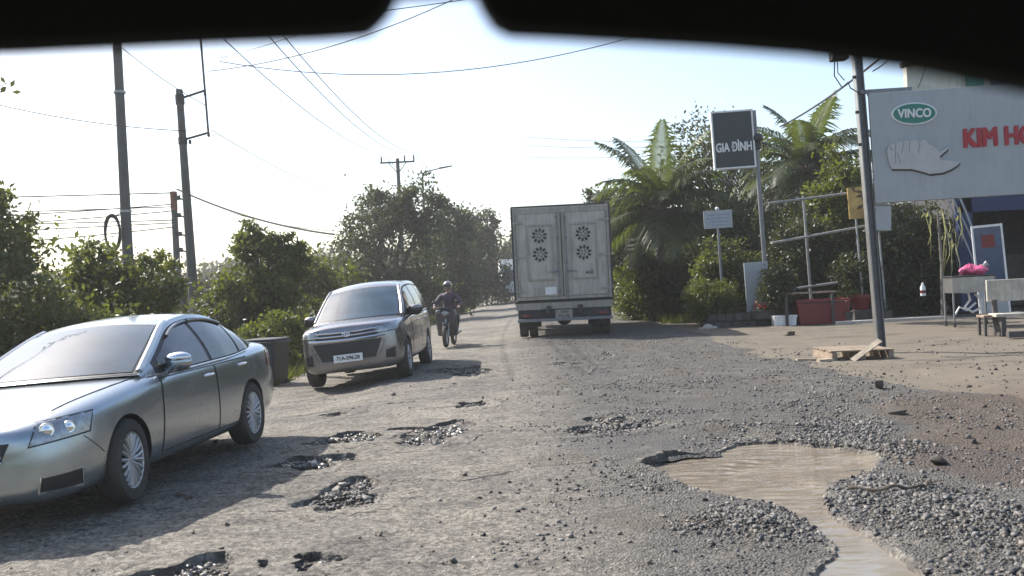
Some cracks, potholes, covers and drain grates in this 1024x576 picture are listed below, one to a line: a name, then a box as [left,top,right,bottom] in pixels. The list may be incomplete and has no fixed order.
pothole [266,470,415,522]
pothole [620,437,961,576]
pothole [110,544,301,576]
pothole [228,542,380,576]
pothole [545,414,701,439]
pothole [436,398,509,413]
pothole [229,449,381,476]
pothole [276,427,416,451]
pothole [412,363,519,379]
pothole [297,407,371,422]
pothole [369,416,498,453]
